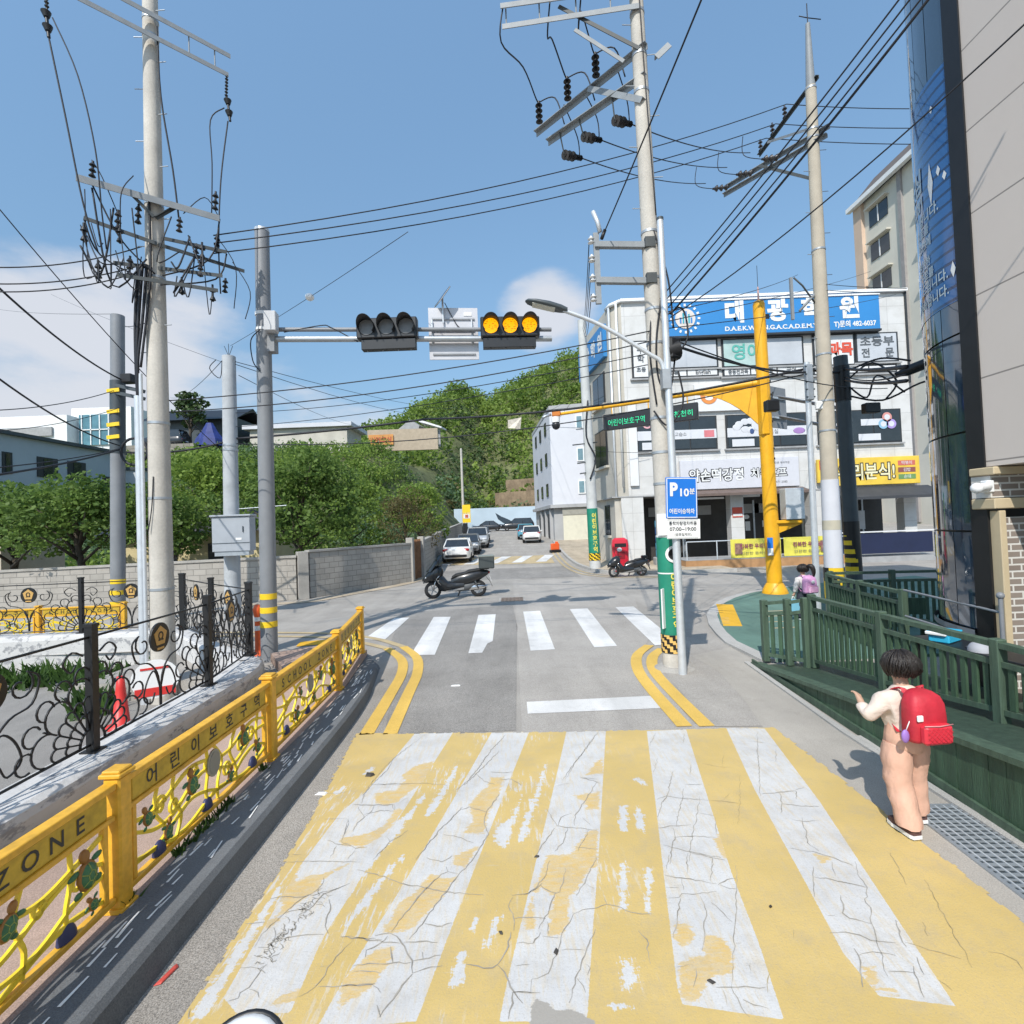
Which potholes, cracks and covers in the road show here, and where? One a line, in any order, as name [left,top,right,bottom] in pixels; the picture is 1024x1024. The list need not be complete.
crack [188,735,523,1019]
crack [755,739,924,996]
crack [890,853,1023,991]
crack [650,739,794,1017]
crack [466,733,651,1019]
